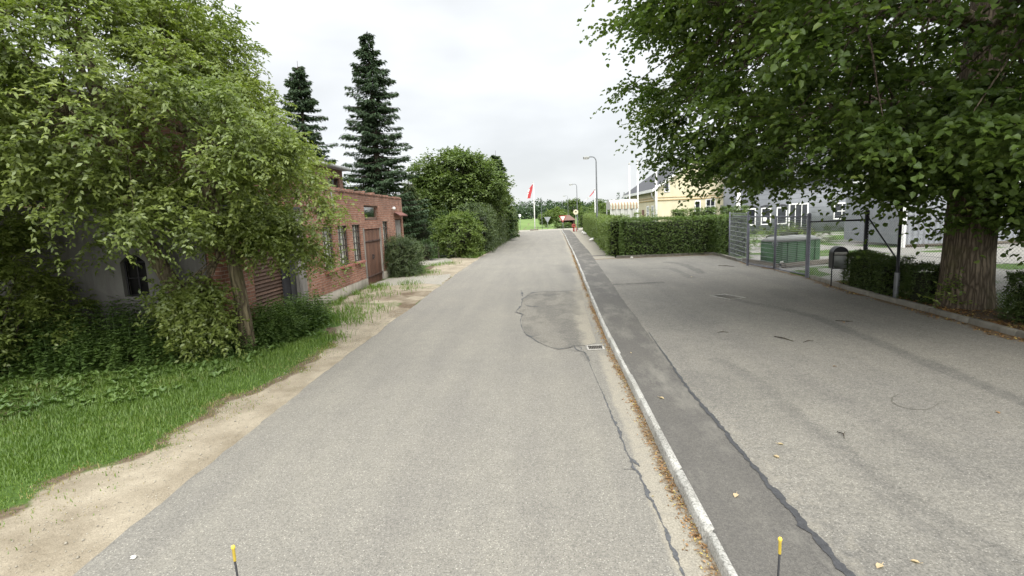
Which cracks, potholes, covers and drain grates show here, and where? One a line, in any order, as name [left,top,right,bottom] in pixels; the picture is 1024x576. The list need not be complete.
crack [516,290,685,576]
